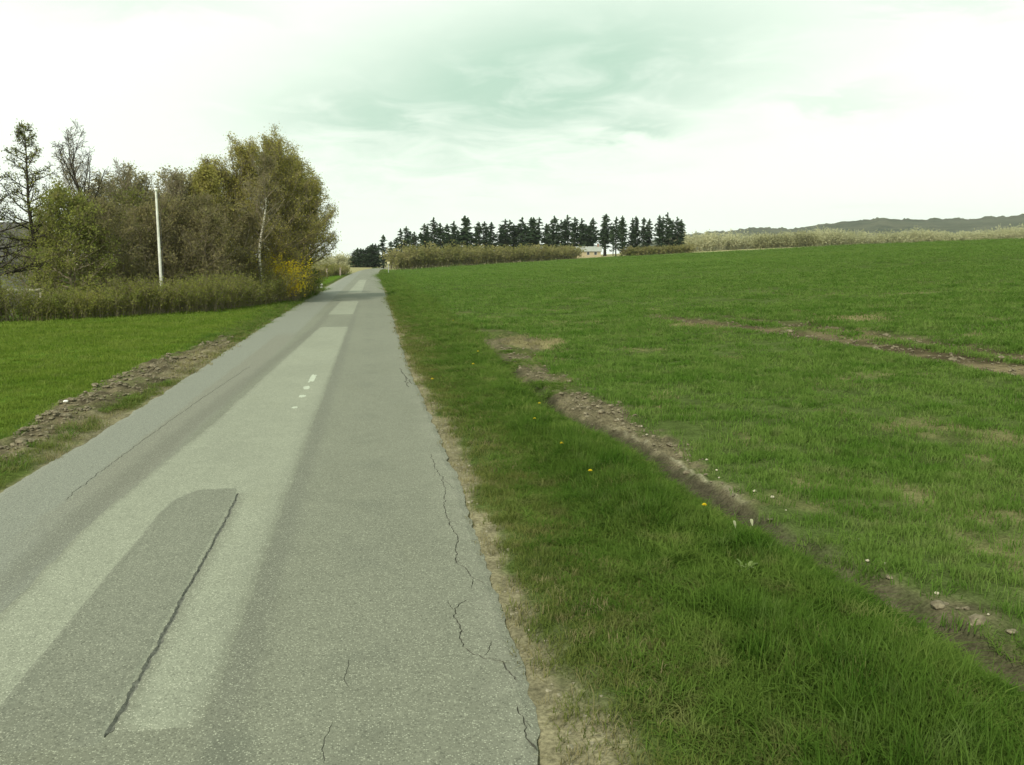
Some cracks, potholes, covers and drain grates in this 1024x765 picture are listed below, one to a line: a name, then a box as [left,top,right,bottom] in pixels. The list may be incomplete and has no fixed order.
crack [104,494,238,737]
crack [430,454,516,679]
crack [517,707,537,751]
